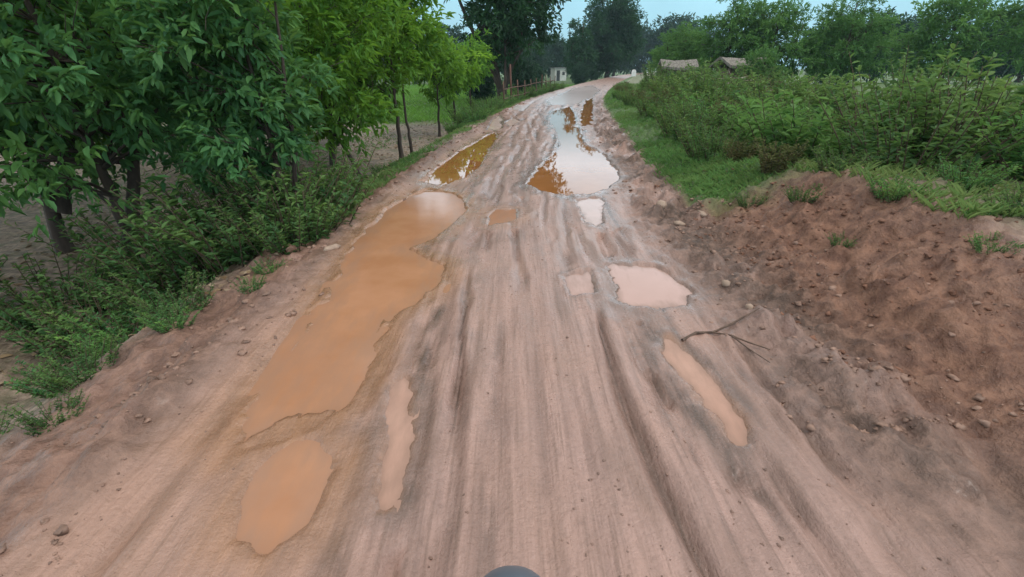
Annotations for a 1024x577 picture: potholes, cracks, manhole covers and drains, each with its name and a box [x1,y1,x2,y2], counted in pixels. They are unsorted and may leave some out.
pothole [591,258,711,317]
pothole [509,105,637,200]
pothole [403,130,508,190]
pothole [556,266,607,298]
pothole [151,185,490,510]
pothole [652,329,766,454]
pothole [193,424,362,577]
pothole [574,97,597,127]
pothole [566,195,616,230]
pothole [478,207,525,228]
